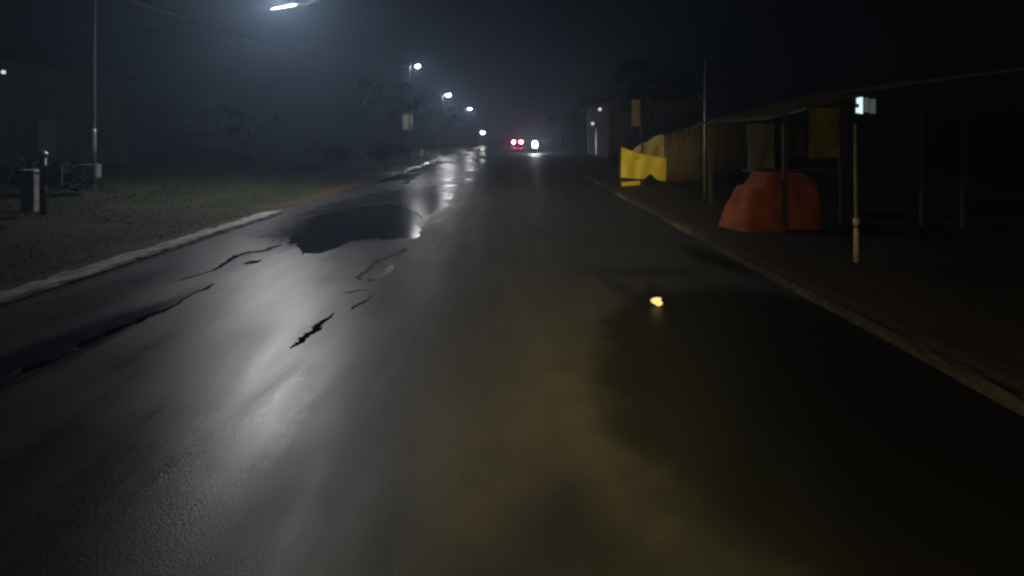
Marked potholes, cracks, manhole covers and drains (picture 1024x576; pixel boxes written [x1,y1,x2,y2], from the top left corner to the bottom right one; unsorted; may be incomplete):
pothole [286,203,424,255]
crack [290,290,374,348]
crack [175,245,282,282]
